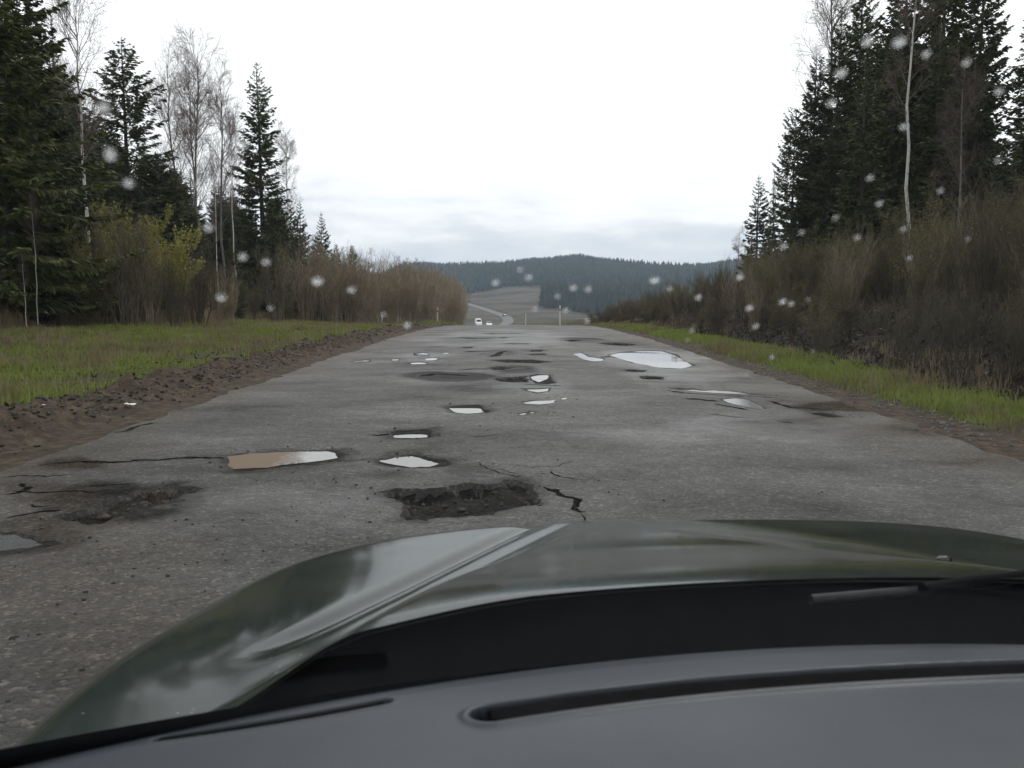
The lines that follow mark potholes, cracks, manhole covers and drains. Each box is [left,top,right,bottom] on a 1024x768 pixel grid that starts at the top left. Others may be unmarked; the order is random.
pothole [720,398,767,409]
pothole [374,451,457,468]
pothole [573,352,605,362]
pothole [446,405,492,414]
crack [479,462,586,521]
crack [3,457,222,518]
pothole [51,483,204,525]
pothole [529,374,558,384]
pothole [387,429,435,439]
pothole [0,531,71,555]
pothole [378,480,544,521]
pothole [609,350,696,369]
